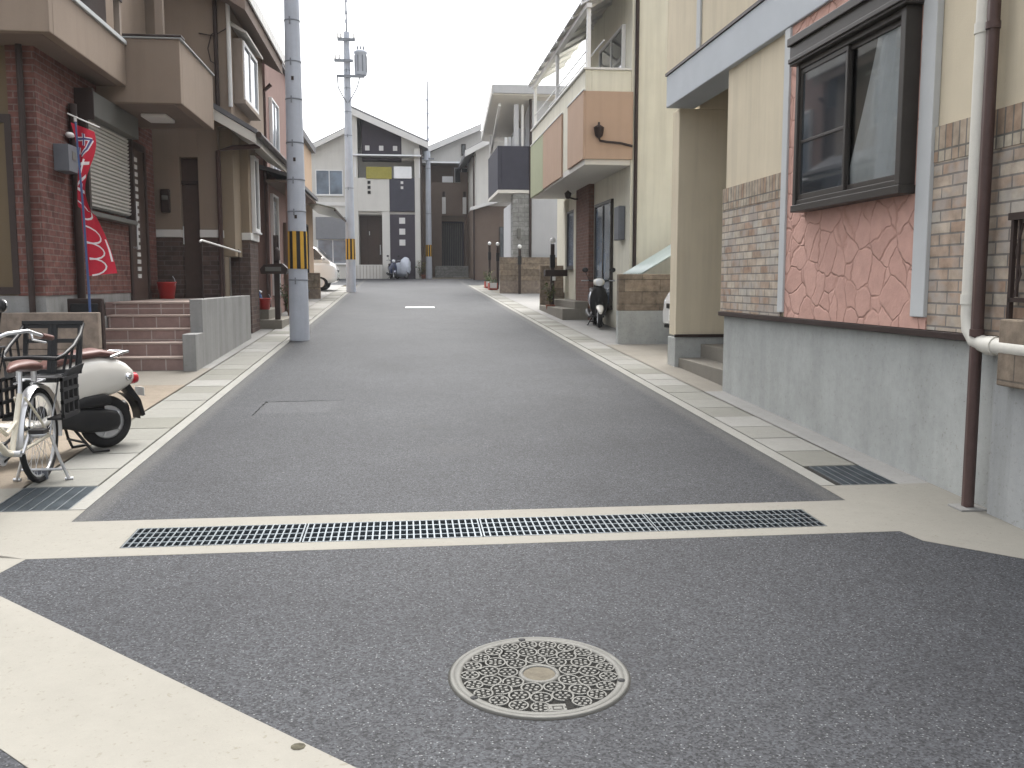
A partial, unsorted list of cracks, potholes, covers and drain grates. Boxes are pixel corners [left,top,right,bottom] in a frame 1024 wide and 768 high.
drain grate [479,514,657,537]
drain grate [644,509,826,531]
drain grate [302,519,483,543]
drain grate [0,486,99,512]
manhole cover [448,637,631,721]
drain grate [121,524,307,548]
drain grate [809,465,897,485]
